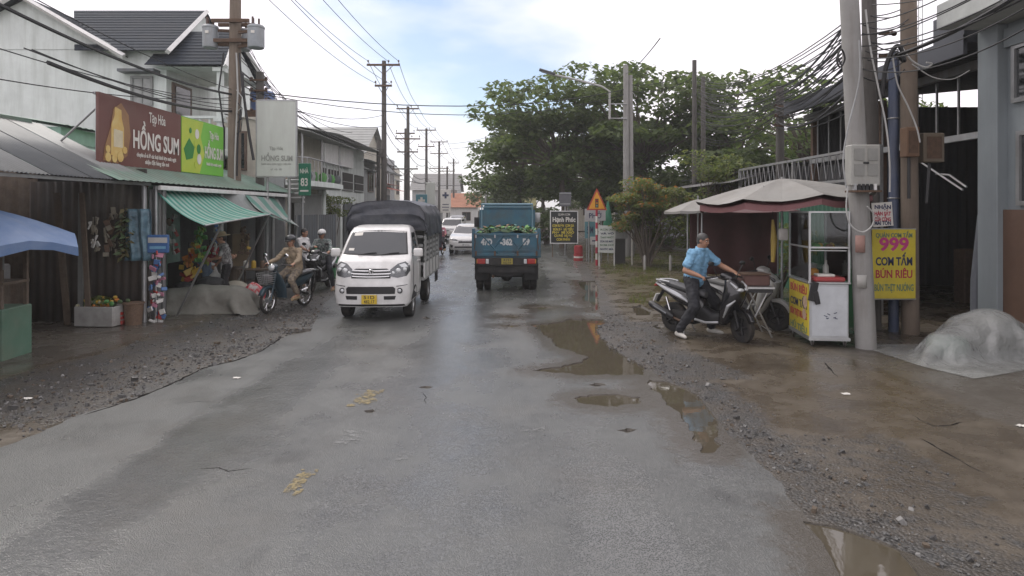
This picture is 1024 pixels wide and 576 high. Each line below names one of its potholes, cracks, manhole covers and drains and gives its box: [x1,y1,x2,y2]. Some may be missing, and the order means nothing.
pothole [647,380,721,453]
pothole [575,394,641,407]
crack [916,417,986,474]
pothole [530,319,645,375]
